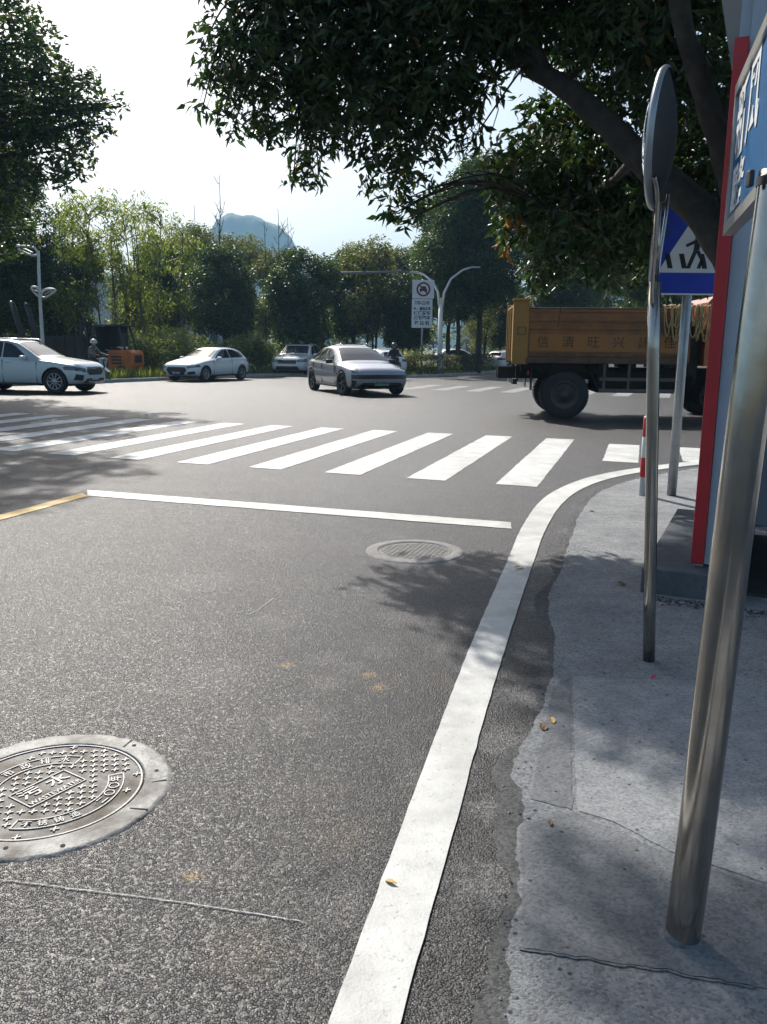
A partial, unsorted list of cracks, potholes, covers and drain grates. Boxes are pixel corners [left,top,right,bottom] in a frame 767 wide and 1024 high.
manhole cover [366,539,464,564]
crack [519,946,754,988]
manhole cover [0,734,173,863]
